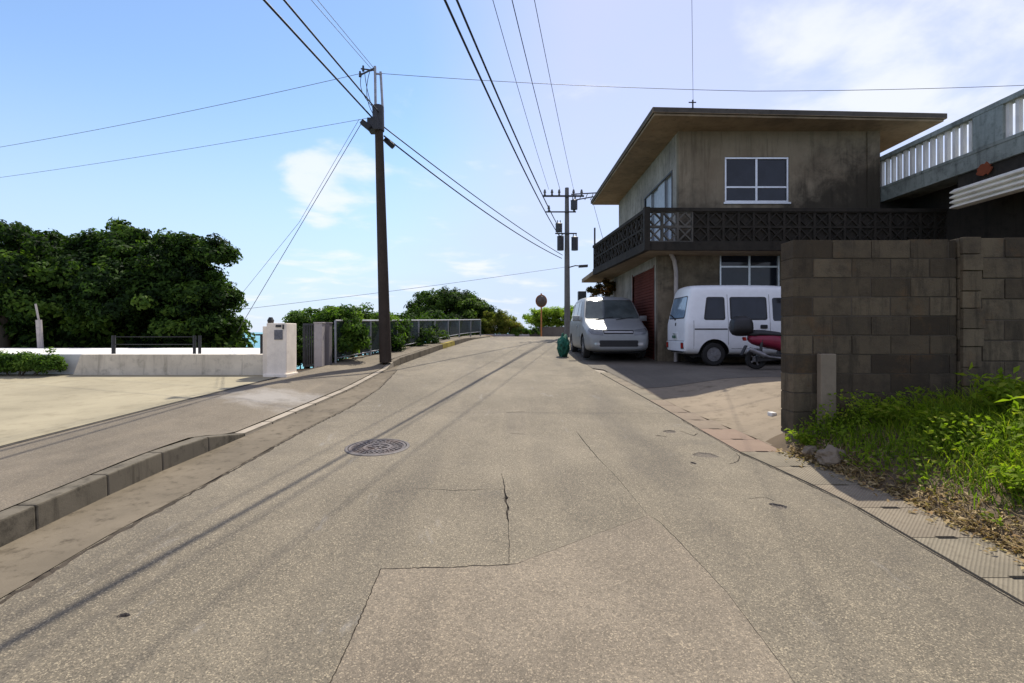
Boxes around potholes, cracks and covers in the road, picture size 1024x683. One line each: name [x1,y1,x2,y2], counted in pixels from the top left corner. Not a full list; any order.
manhole cover [344,439,410,456]
crack [411,474,510,563]
